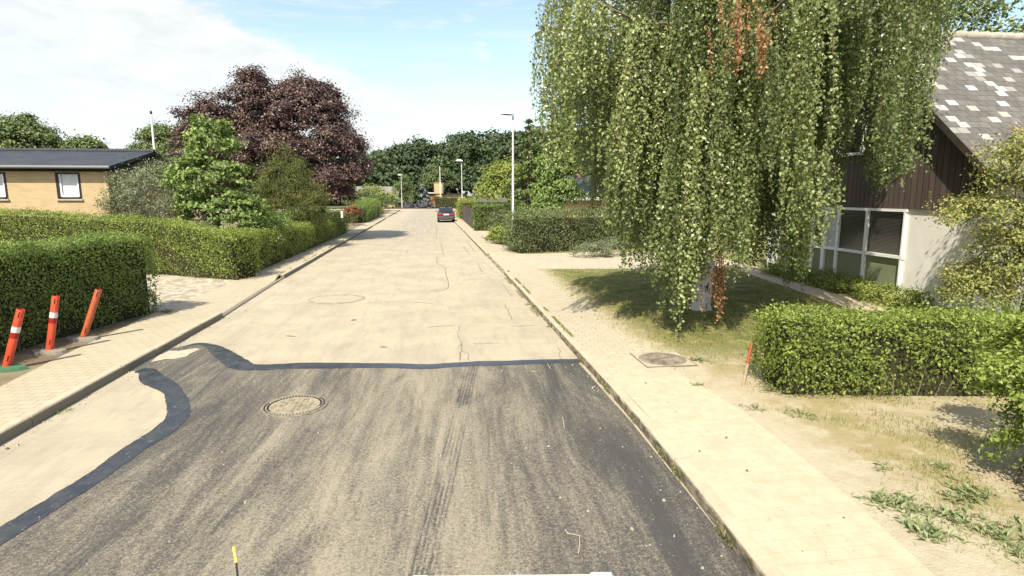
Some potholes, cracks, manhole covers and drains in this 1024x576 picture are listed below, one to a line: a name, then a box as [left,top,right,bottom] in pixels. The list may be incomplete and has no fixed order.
crack [435,325,486,361]
manhole cover [260,394,328,418]
manhole cover [308,294,365,304]
manhole cover [630,351,697,367]
